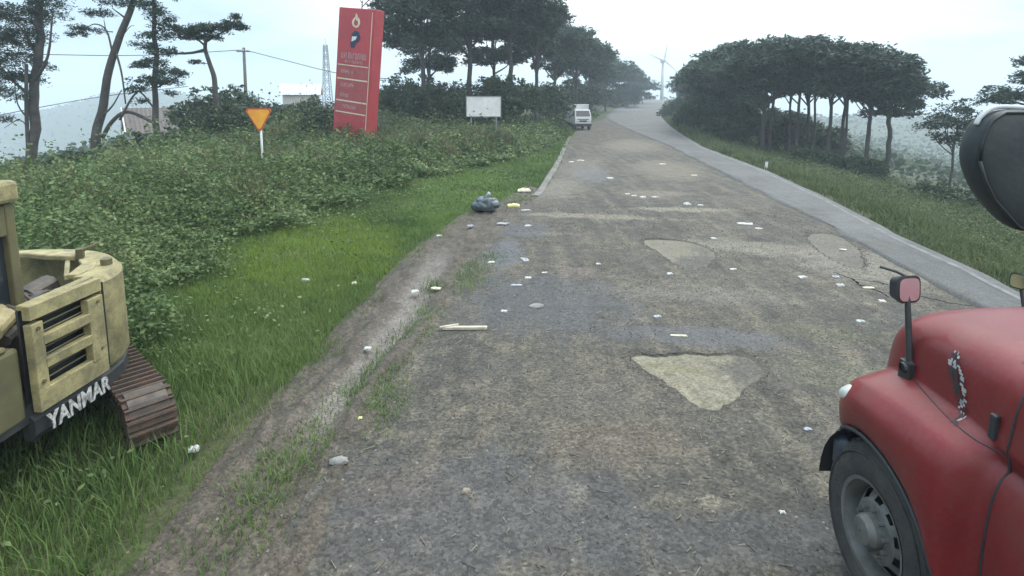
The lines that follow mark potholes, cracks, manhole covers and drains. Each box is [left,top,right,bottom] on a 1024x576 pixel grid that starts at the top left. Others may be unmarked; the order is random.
crack [834,272,973,306]
